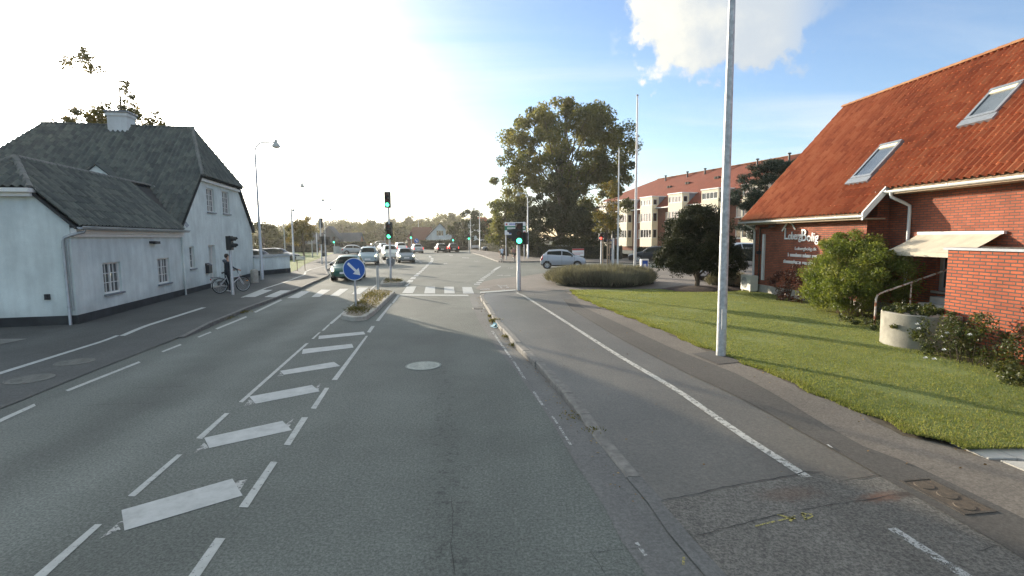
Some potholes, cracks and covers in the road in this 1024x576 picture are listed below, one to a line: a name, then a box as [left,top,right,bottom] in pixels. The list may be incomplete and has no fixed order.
manhole cover [53,358,96,366]
utility cover [899,478,998,515]
manhole cover [405,361,441,370]
manhole cover [2,373,56,385]
